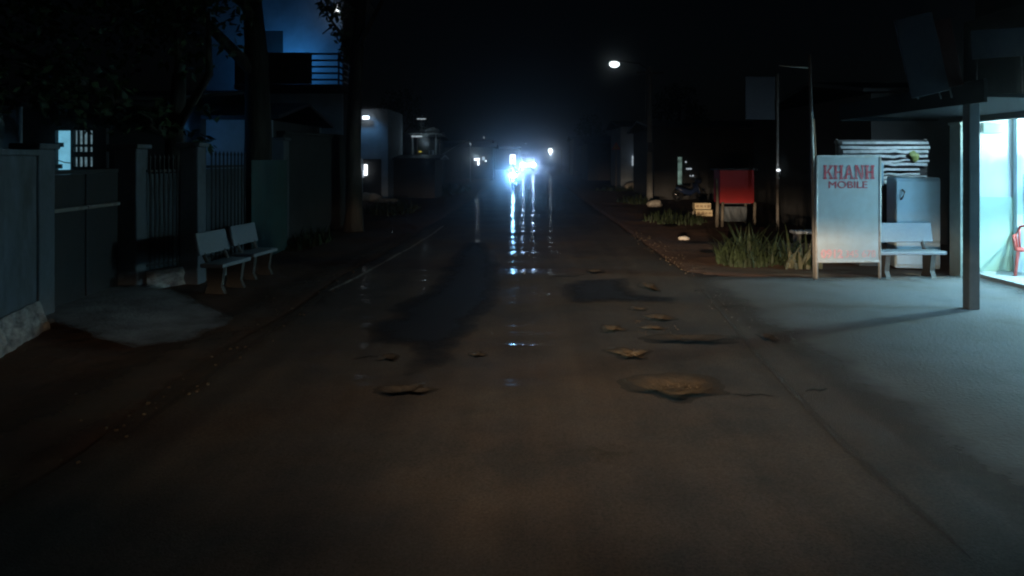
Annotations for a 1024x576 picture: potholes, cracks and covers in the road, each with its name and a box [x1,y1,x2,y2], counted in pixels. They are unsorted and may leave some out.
pothole [616,372,730,404]
pothole [375,353,400,362]
pothole [599,324,629,333]
pothole [639,313,679,322]
pothole [637,334,740,345]
pothole [600,347,653,360]
pothole [636,282,662,292]
pothole [372,384,439,397]
